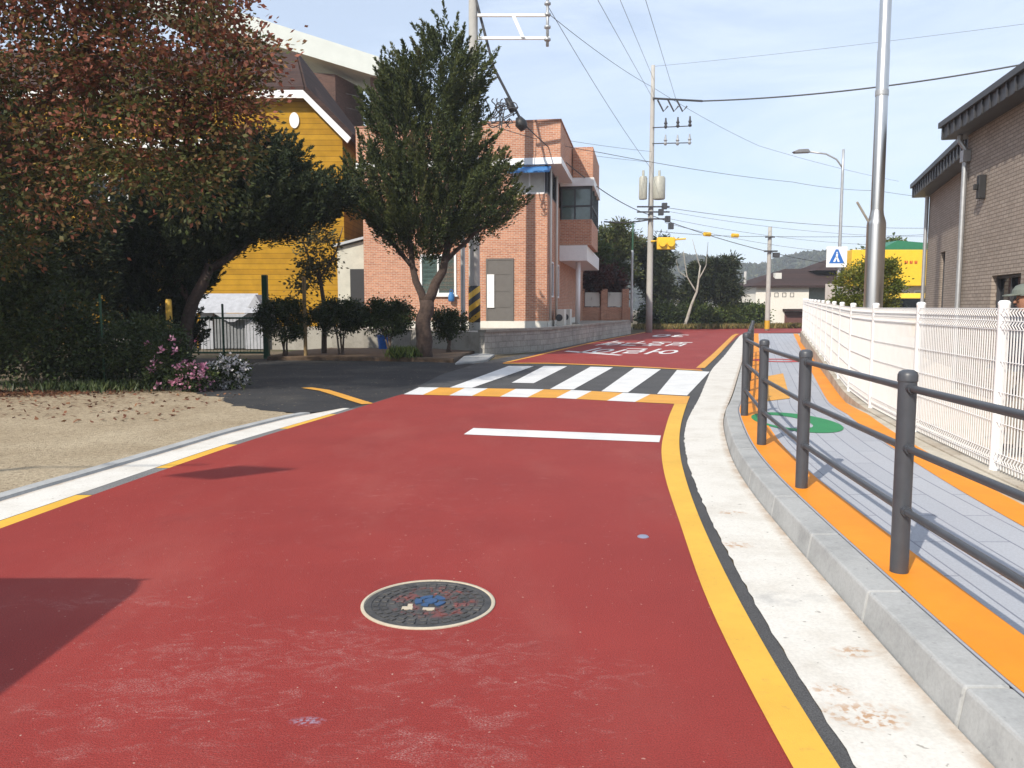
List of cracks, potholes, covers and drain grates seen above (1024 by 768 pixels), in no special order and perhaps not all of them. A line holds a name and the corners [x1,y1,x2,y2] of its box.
manhole cover [360,580,495,630]
